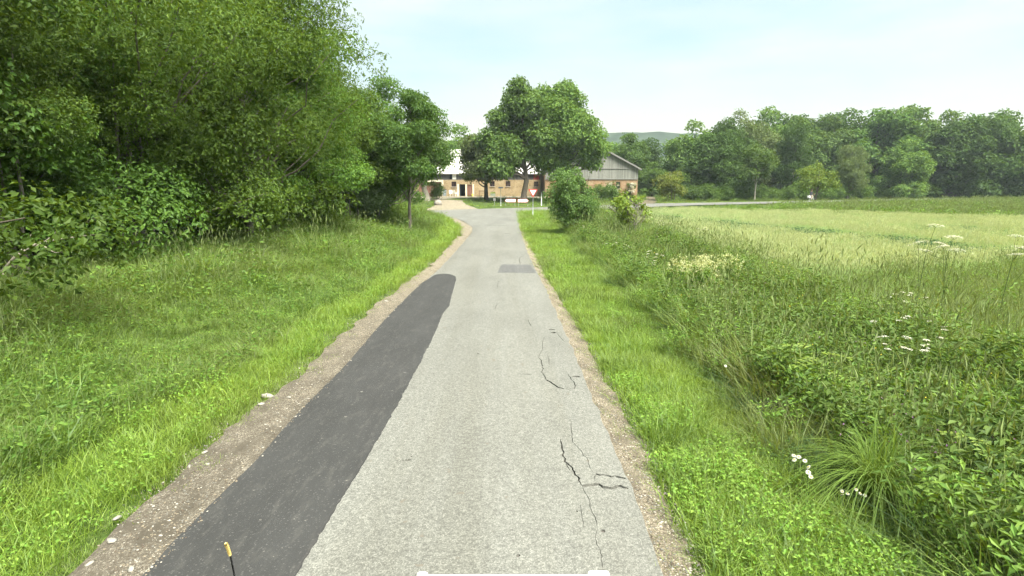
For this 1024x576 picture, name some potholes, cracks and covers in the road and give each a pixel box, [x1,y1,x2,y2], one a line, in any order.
crack [528,320,576,389]
crack [560,419,628,571]
